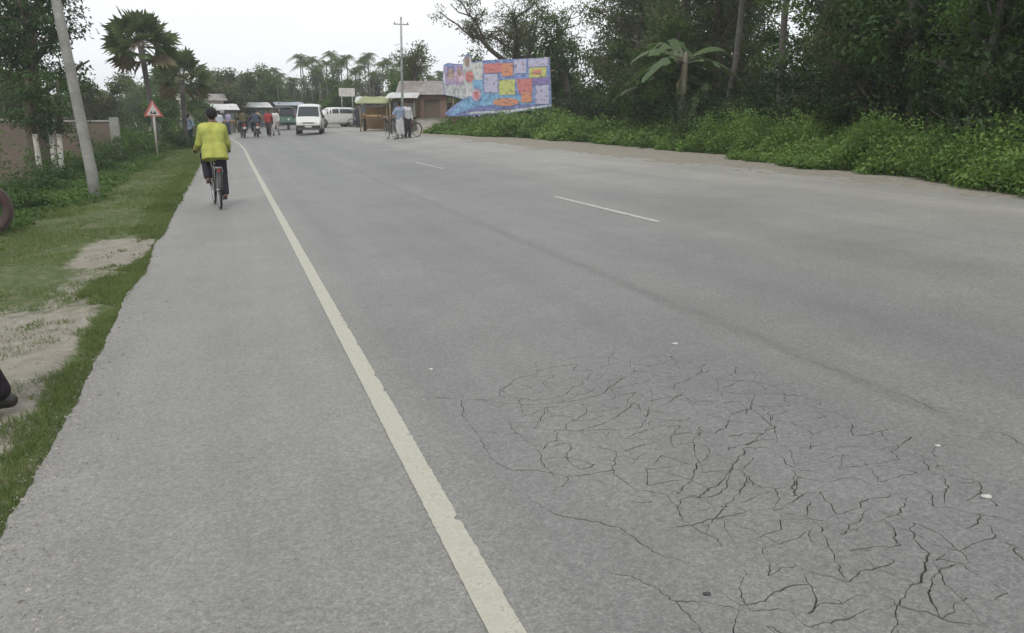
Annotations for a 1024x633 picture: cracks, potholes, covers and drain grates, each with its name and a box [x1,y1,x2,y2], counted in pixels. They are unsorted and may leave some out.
crack [650,298,1023,445]
crack [415,352,1024,633]
